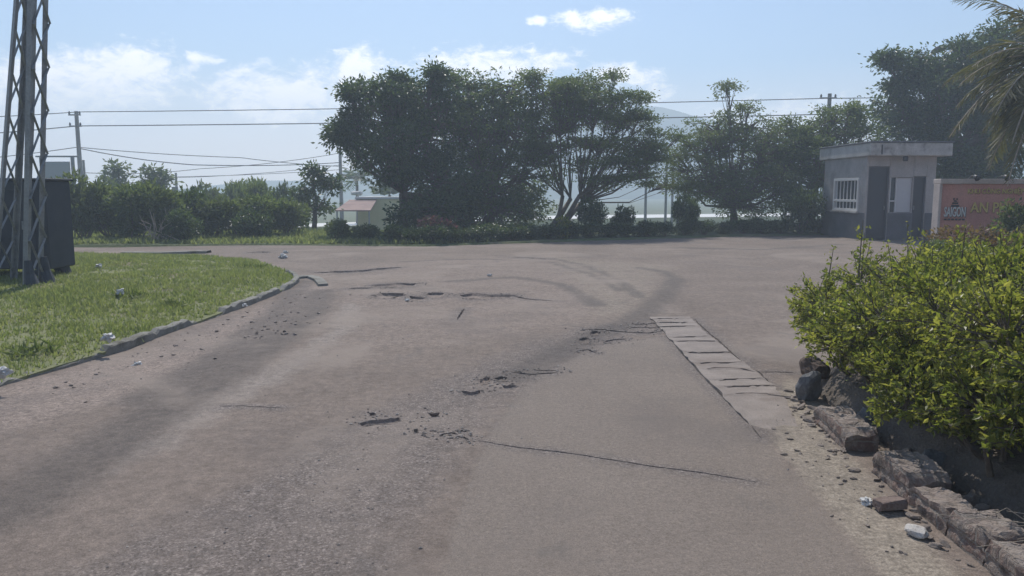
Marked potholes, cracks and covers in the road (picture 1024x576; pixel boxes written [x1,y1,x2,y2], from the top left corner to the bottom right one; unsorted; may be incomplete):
crack [478,440,755,482]
crack [316,267,401,289]
pothole [359,417,401,427]
